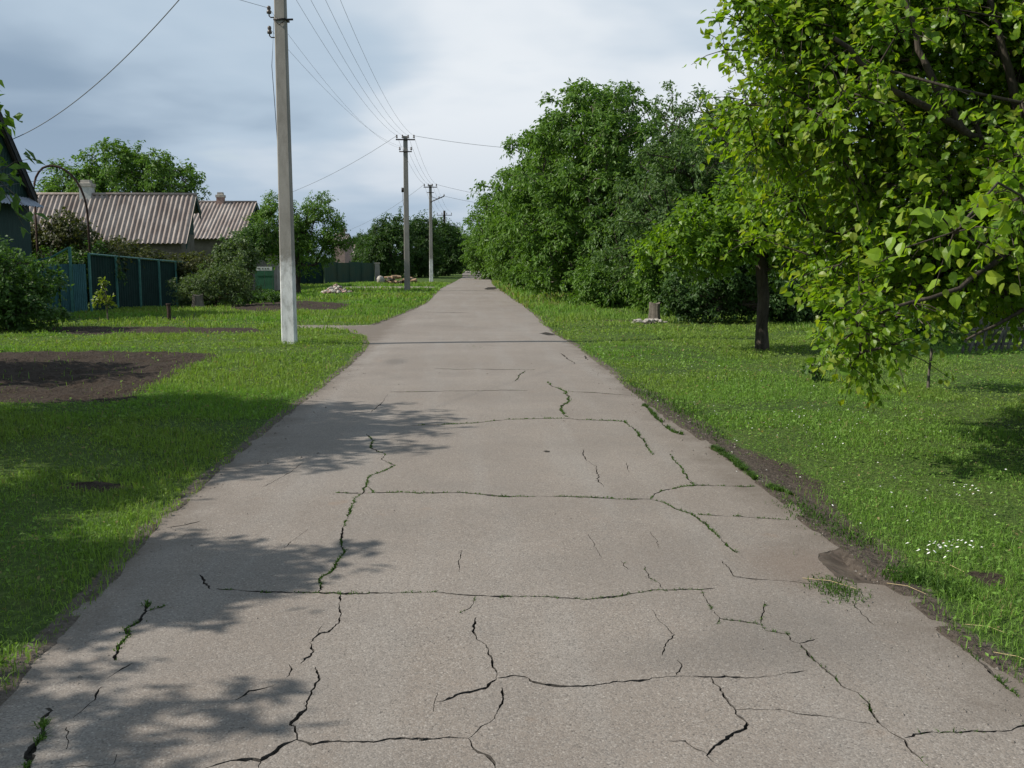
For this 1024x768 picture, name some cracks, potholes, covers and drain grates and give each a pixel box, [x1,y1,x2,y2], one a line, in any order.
pothole [818,548,884,585]
crack [23,602,166,768]
crack [412,385,647,444]
crack [416,368,527,392]
crack [200,434,1024,768]
